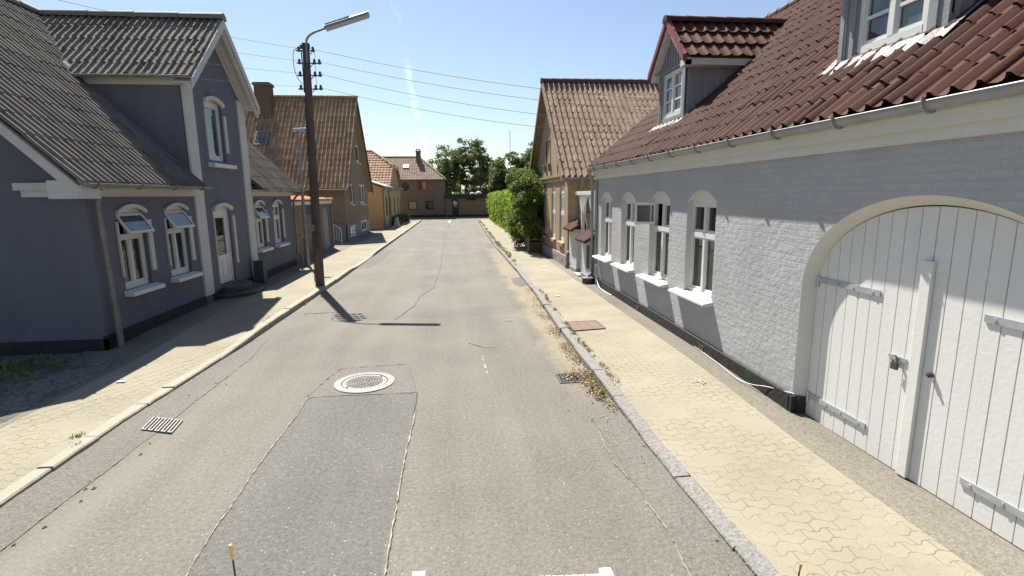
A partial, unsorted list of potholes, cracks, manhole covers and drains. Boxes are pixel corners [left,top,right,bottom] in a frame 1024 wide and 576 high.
manhole cover [333,372,395,394]
drain grate [555,373,584,384]
drain grate [141,417,183,434]
crack [394,224,449,320]
manhole cover [566,320,606,331]
